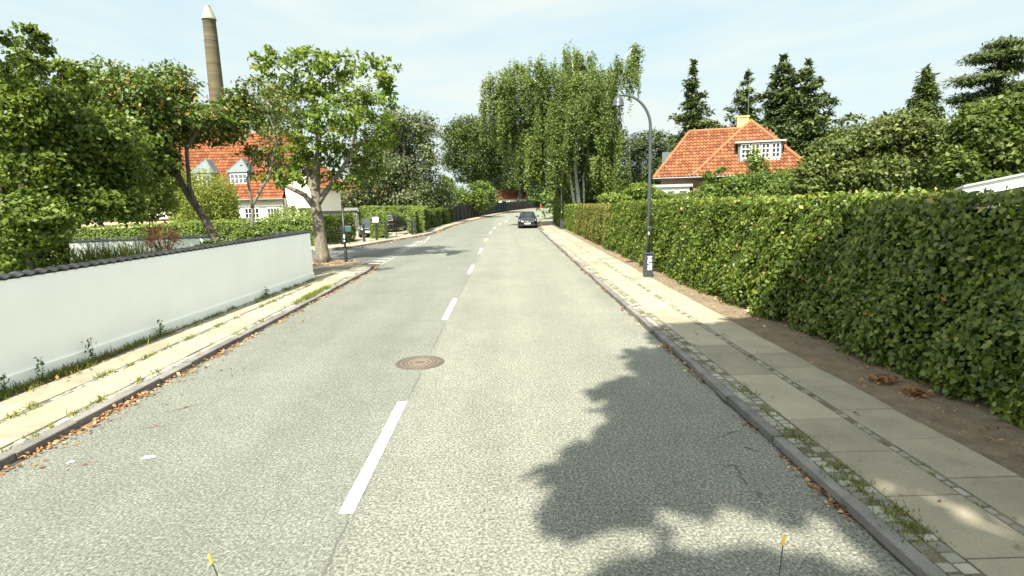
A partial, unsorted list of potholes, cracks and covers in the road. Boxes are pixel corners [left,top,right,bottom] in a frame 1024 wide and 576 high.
manhole cover [395,356,445,370]
crack [721,464,762,498]
